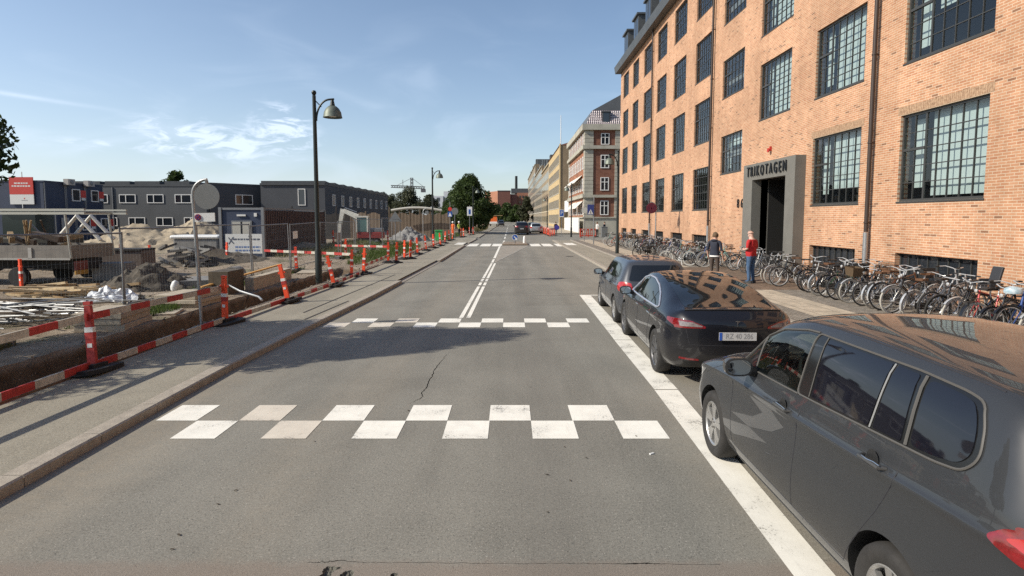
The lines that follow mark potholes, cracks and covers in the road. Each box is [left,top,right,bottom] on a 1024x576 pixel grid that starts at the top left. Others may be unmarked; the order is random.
pothole [319,566,342,576]
